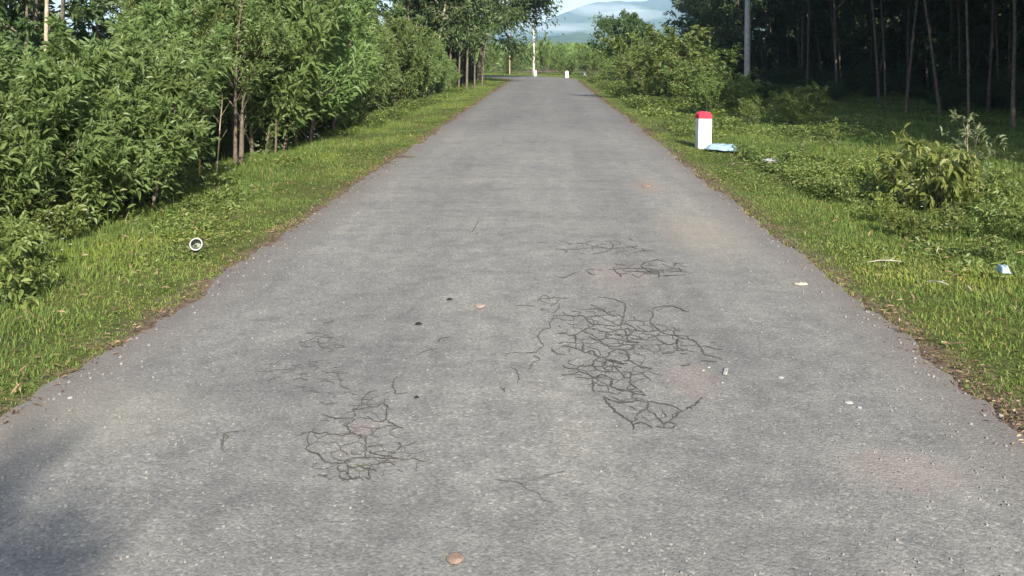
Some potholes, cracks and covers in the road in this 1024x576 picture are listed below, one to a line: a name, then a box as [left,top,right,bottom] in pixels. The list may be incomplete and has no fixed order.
crack [501,295,722,429]
crack [542,238,686,278]
crack [255,320,429,482]
crack [500,471,564,502]
